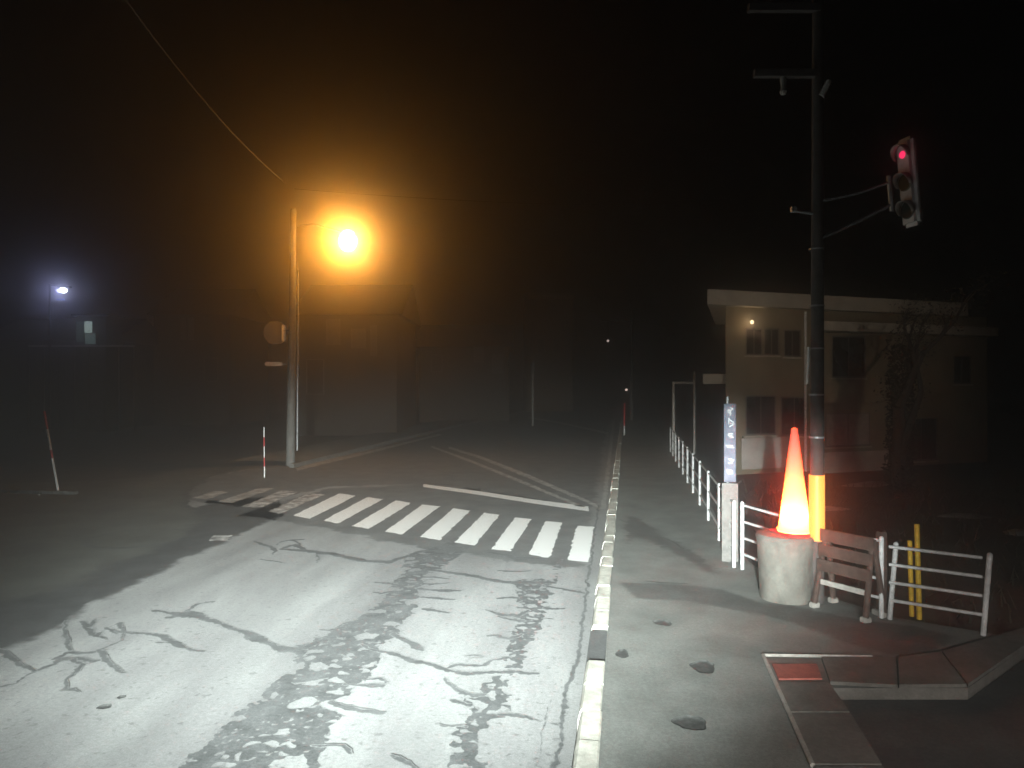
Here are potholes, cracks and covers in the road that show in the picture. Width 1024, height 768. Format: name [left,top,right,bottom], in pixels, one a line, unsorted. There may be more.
pothole [689,660,715,674]
crack [0,505,600,768]
pothole [671,715,706,730]
